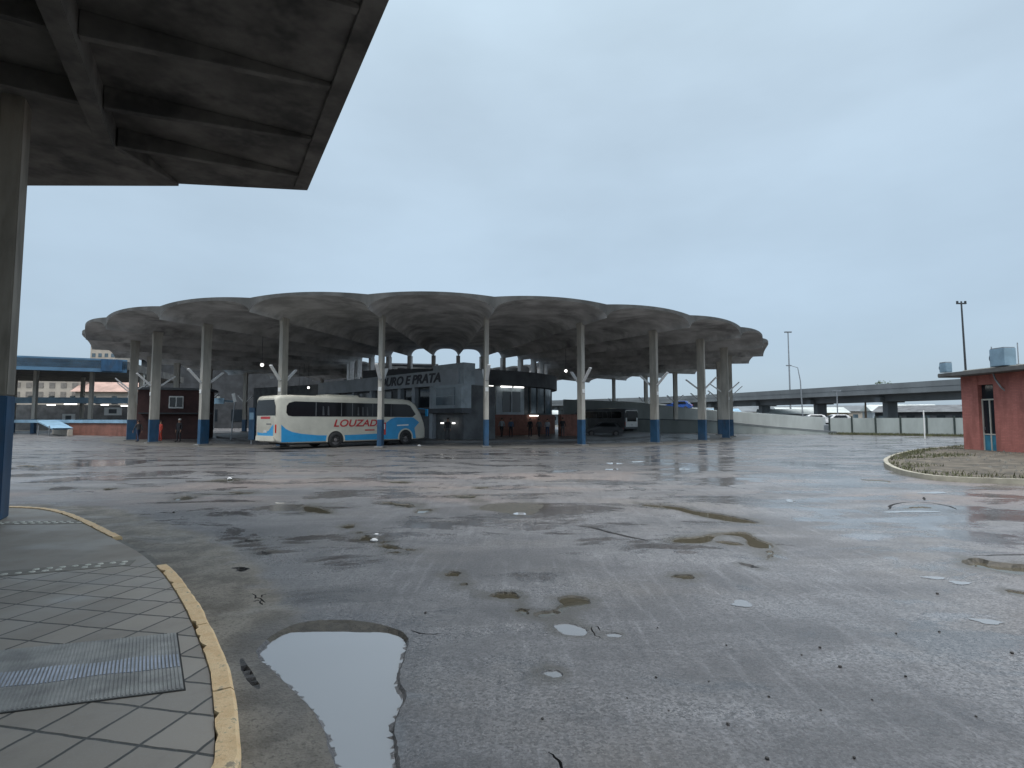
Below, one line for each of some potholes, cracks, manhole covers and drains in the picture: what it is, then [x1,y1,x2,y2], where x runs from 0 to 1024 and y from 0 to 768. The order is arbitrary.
pothole [256,620,409,768]
crack [582,526,647,541]
crack [888,497,956,509]
pothole [533,595,591,618]
pothole [961,558,1024,575]
pothole [240,658,260,689]
pothole [639,504,759,523]
pothole [489,591,521,599]
drain grate [0,633,186,714]
pothole [553,623,589,636]
pothole [671,532,774,548]
